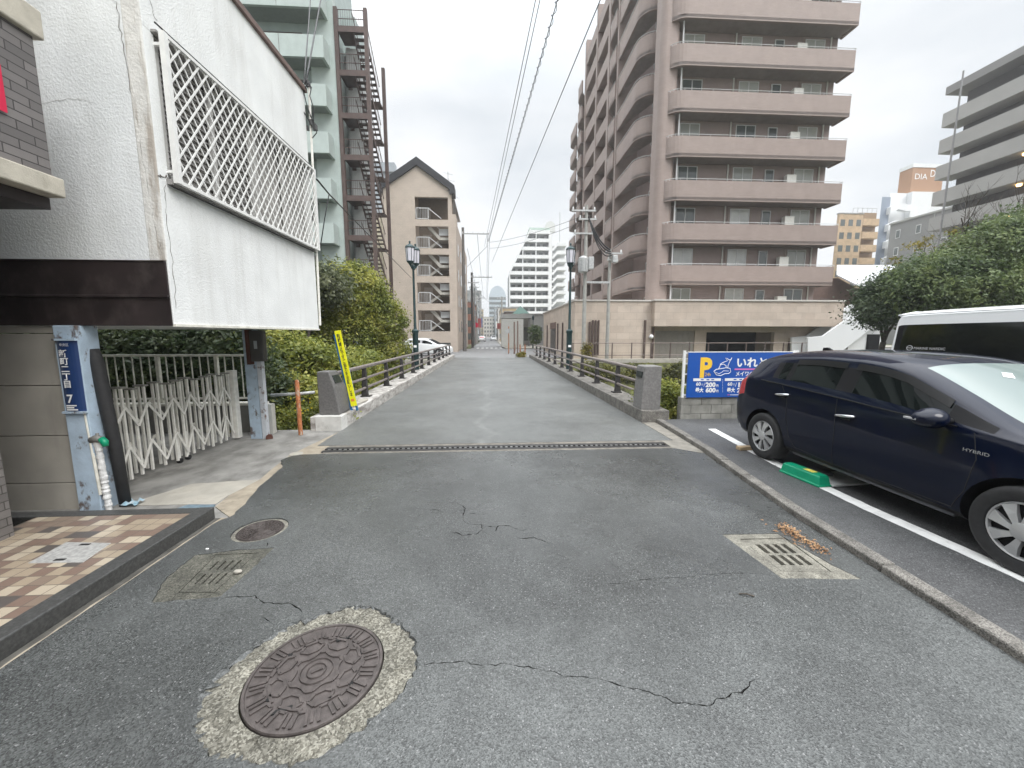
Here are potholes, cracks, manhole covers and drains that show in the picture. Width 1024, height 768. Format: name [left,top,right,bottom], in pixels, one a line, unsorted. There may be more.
crack [416,661,755,706]
utility cover [29,542,111,563]
manhole cover [192,605,418,768]
manhole cover [231,519,288,543]
